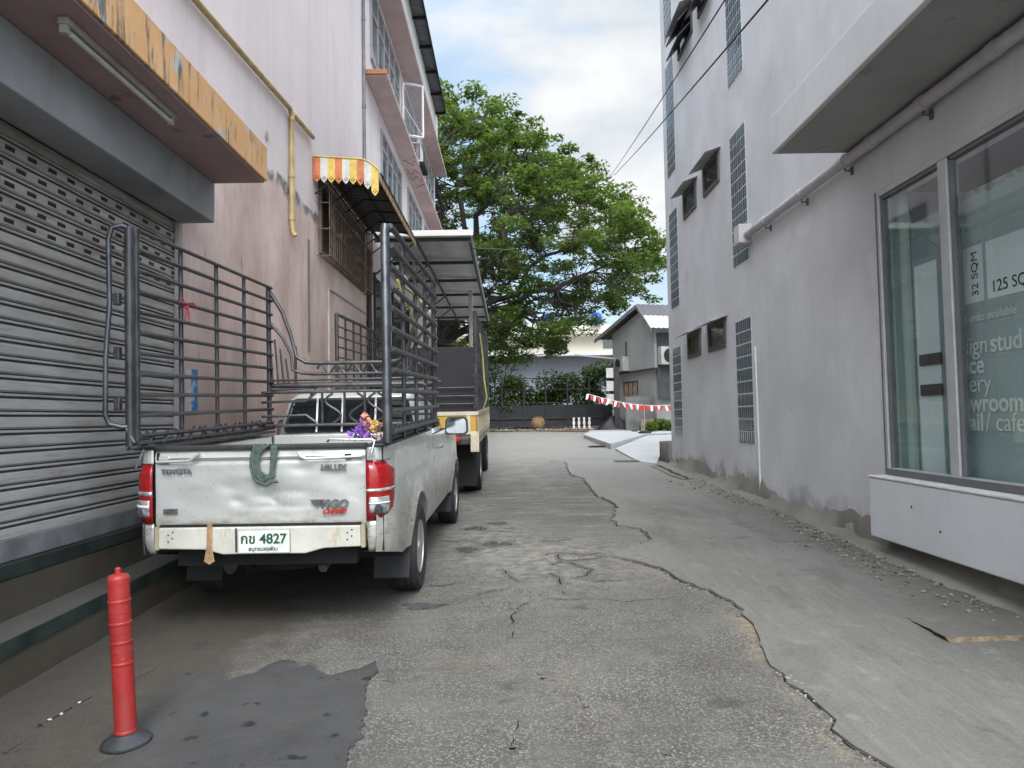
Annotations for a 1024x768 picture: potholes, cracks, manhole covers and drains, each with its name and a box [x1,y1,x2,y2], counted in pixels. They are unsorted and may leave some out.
crack [663,743,683,757]
crack [765,667,890,768]
crack [505,717,525,749]
crack [437,462,743,638]
